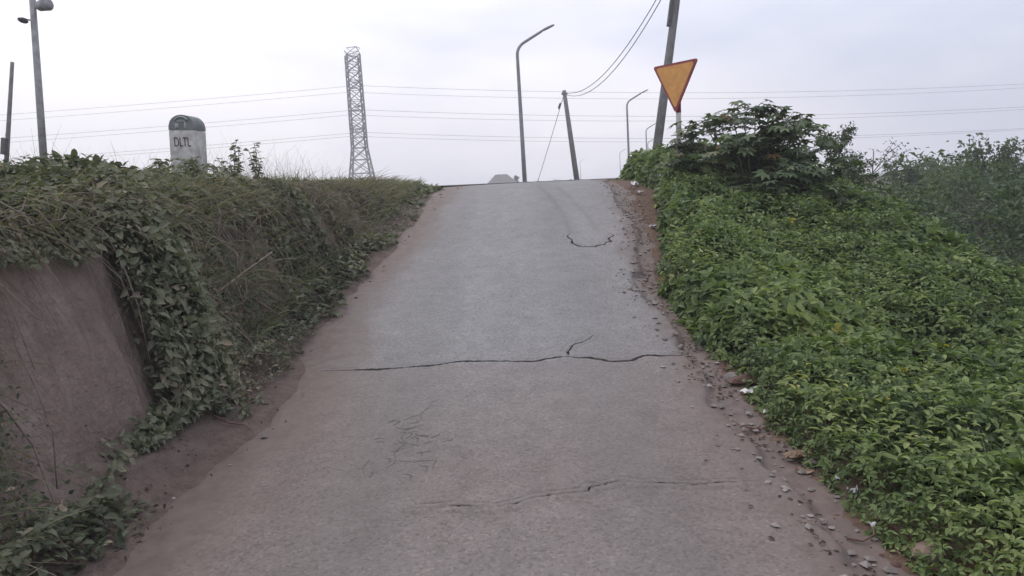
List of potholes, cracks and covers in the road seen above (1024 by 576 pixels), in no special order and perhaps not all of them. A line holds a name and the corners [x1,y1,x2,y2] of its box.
crack [362,400,771,515]
crack [320,334,696,374]
crack [563,233,619,249]
